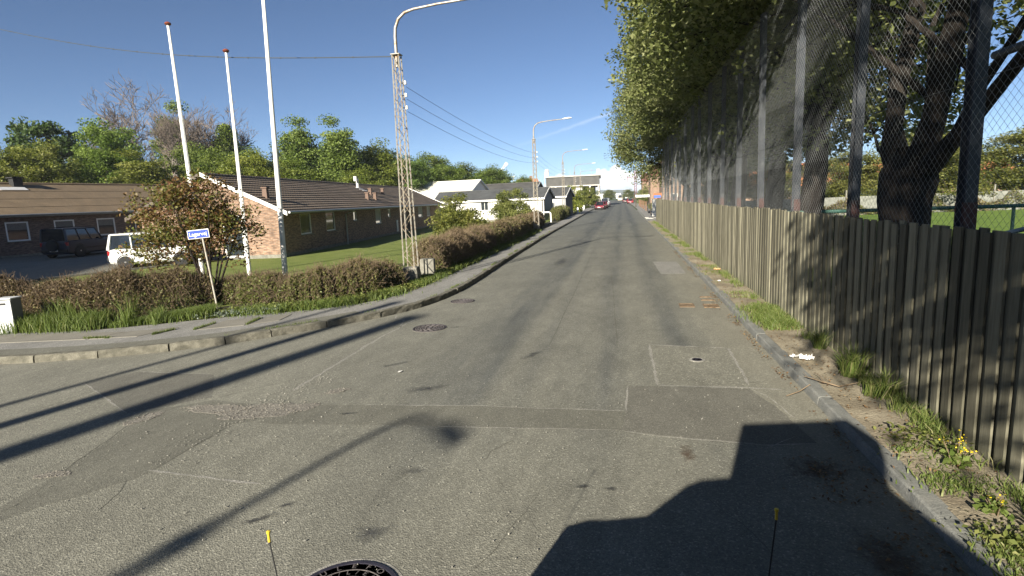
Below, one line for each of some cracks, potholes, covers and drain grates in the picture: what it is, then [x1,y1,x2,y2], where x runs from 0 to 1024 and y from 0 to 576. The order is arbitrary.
manhole cover [412,324,447,332]
crack [474,493,539,569]
manhole cover [306,558,402,576]
crack [6,412,144,510]
